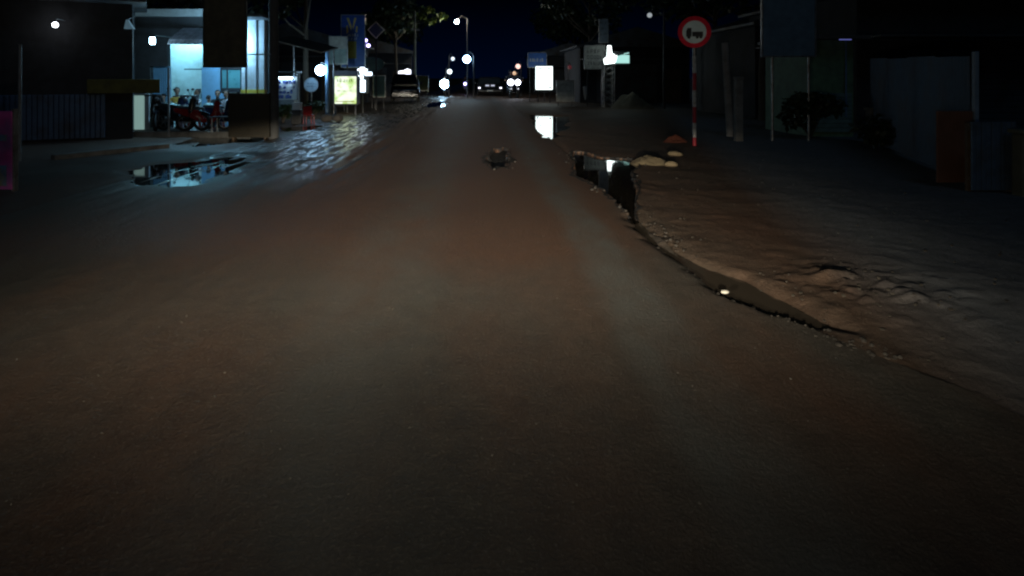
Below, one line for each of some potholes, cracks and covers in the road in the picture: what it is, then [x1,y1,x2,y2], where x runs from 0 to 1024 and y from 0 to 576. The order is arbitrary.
pothole [481,146,517,170]
pothole [565,151,647,224]
